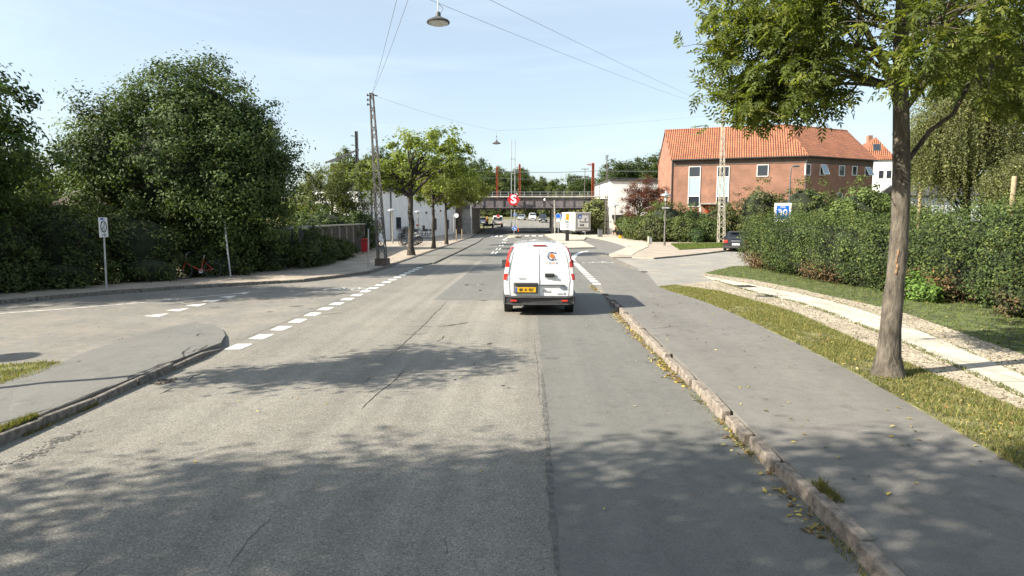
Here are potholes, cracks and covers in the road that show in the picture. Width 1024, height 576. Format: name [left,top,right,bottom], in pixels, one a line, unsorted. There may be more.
crack [0,430,91,466]
